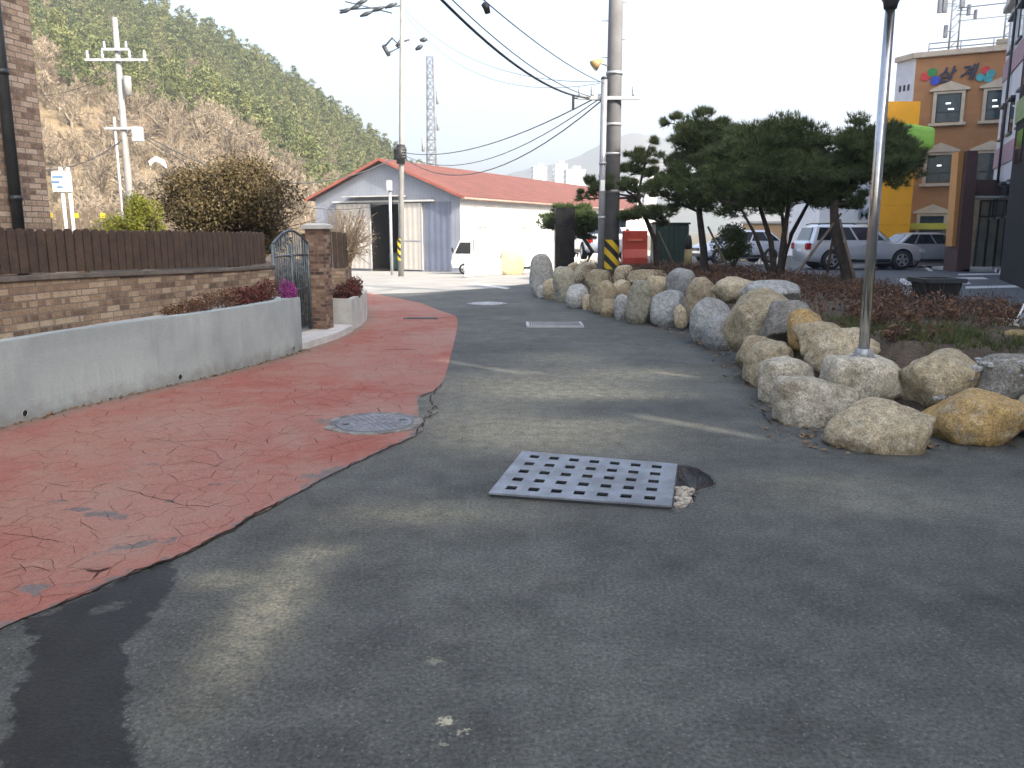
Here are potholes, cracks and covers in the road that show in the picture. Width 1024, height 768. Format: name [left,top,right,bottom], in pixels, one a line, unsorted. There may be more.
pothole [671,463,716,515]
manhole cover [324,412,424,435]
